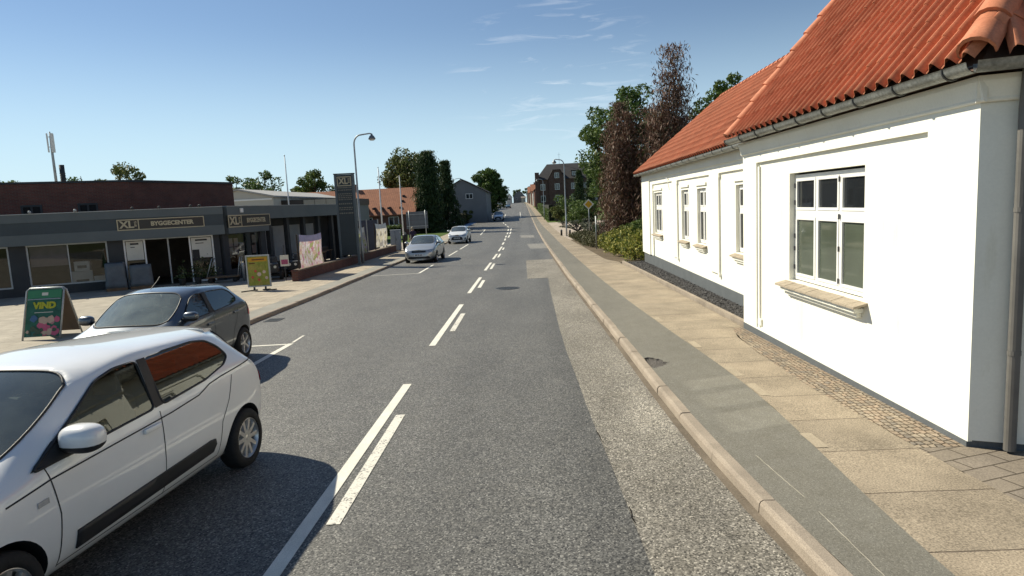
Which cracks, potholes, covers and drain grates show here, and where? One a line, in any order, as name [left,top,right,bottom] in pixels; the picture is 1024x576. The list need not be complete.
pothole [645,357,668,368]
crack [756,455,885,576]
